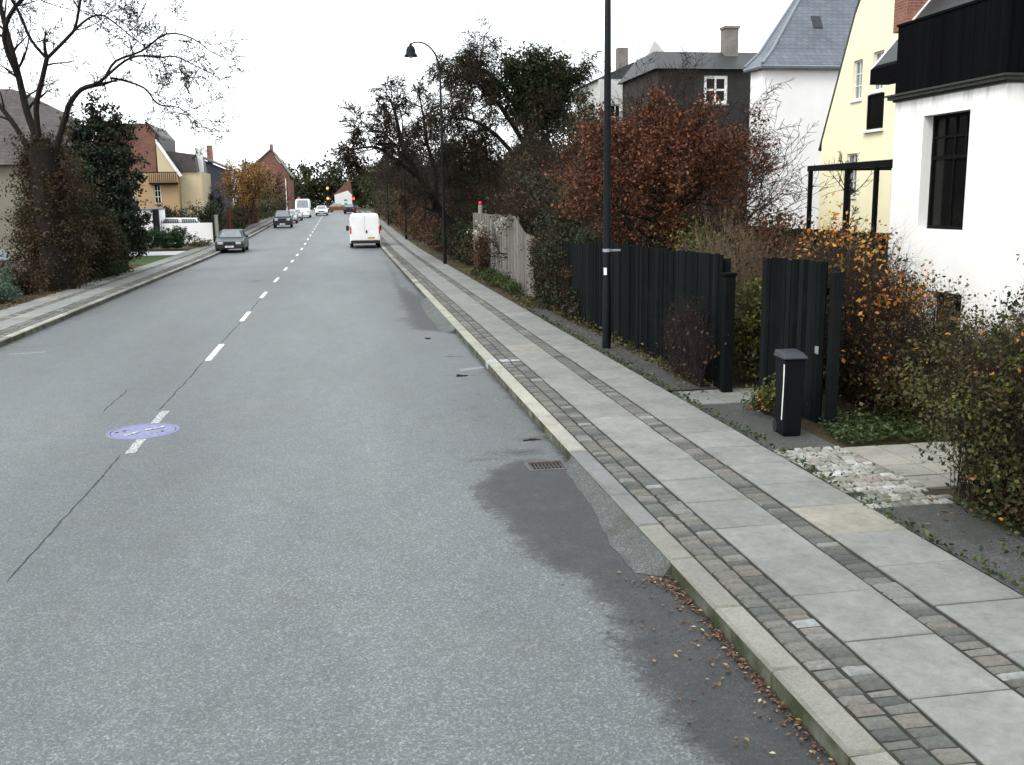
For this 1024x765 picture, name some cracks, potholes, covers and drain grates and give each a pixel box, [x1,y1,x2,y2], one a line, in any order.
drain grate [523,460,566,471]
crack [7,298,261,582]
manhole cover [105,423,180,440]
